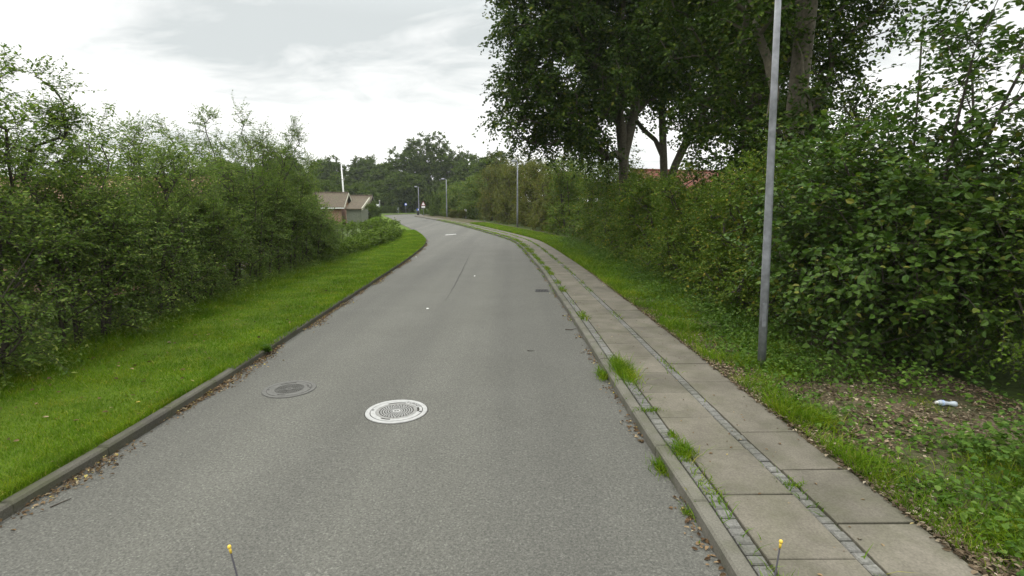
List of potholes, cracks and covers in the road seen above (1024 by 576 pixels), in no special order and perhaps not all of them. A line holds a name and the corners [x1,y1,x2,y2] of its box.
manhole cover [364,400,428,424]
manhole cover [261,380,317,398]
